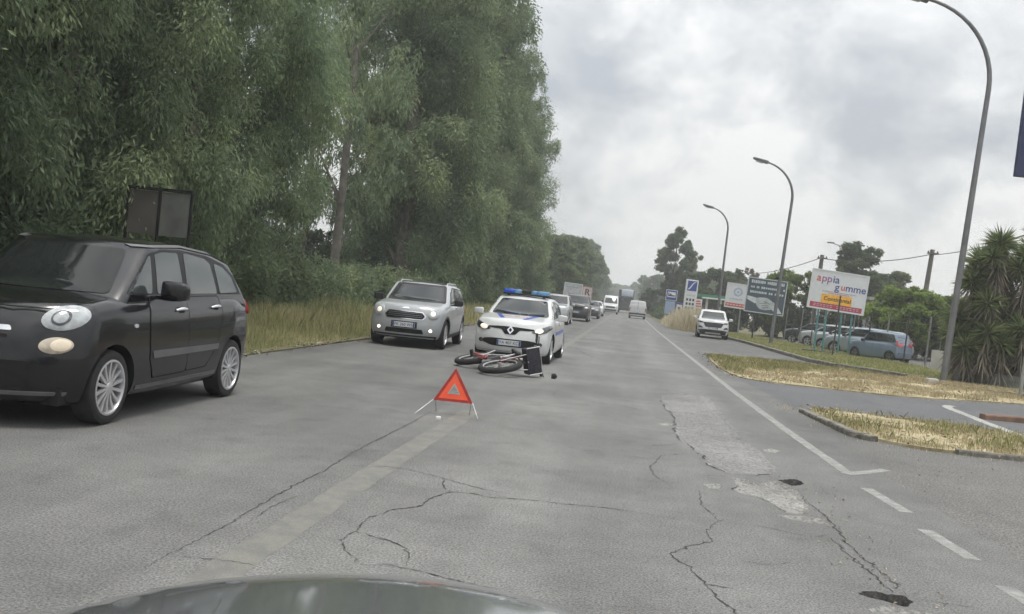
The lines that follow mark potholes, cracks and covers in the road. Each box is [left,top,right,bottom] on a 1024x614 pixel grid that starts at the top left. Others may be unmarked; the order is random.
pothole [859,591,914,607]
crack [334,465,672,589]
crack [670,492,736,613]
crack [762,493,906,595]
